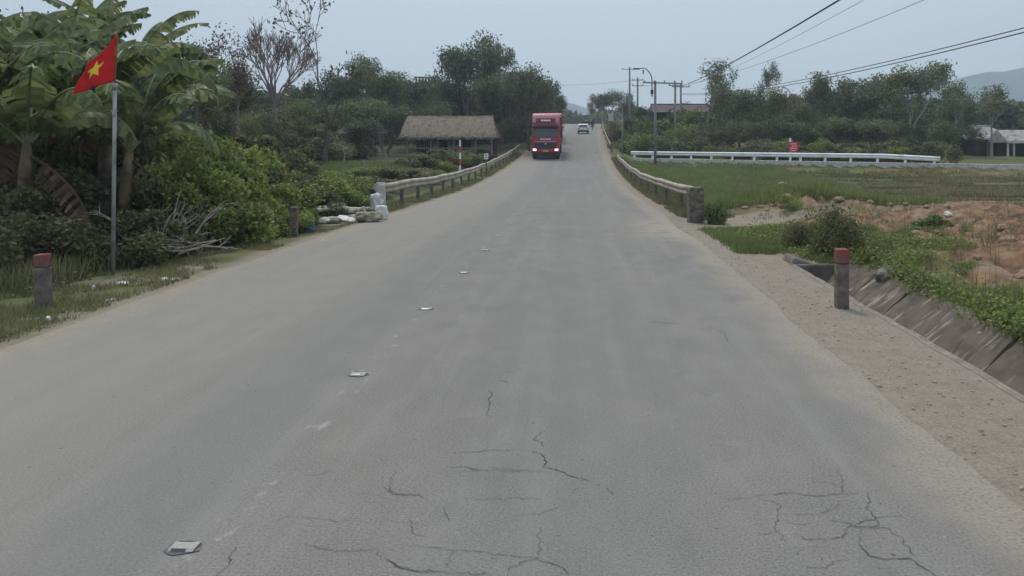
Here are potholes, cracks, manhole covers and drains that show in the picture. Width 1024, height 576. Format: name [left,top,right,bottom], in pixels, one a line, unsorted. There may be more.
crack [727,467,937,576]
crack [281,472,569,575]
crack [450,433,613,494]
